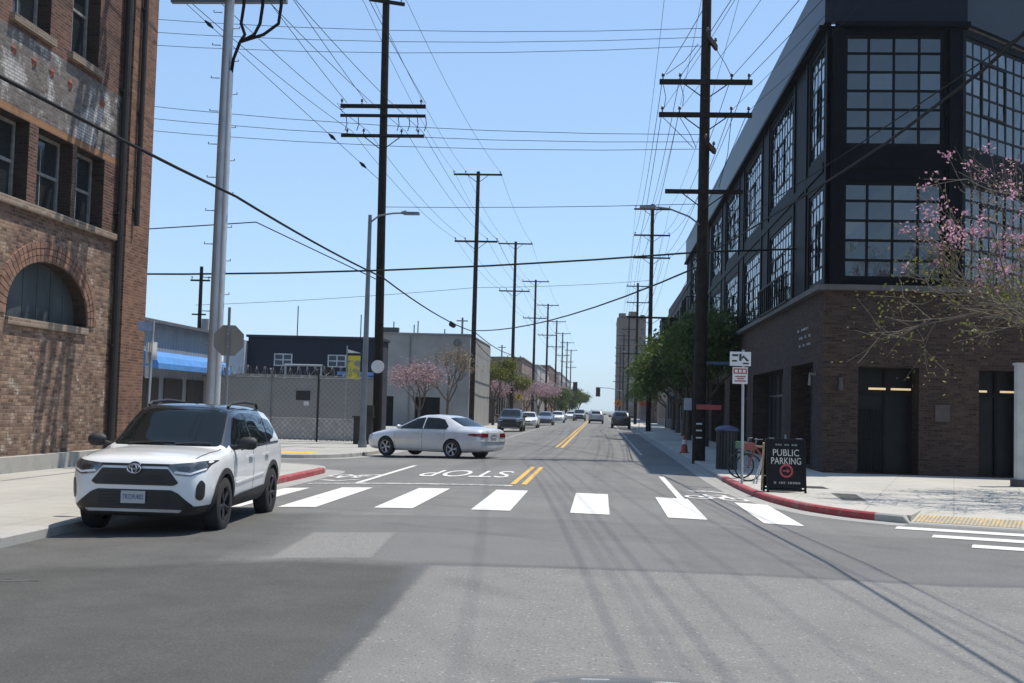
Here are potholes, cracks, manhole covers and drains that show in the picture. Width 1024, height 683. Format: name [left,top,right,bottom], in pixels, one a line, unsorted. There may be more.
utility cover [831,493,866,501]
